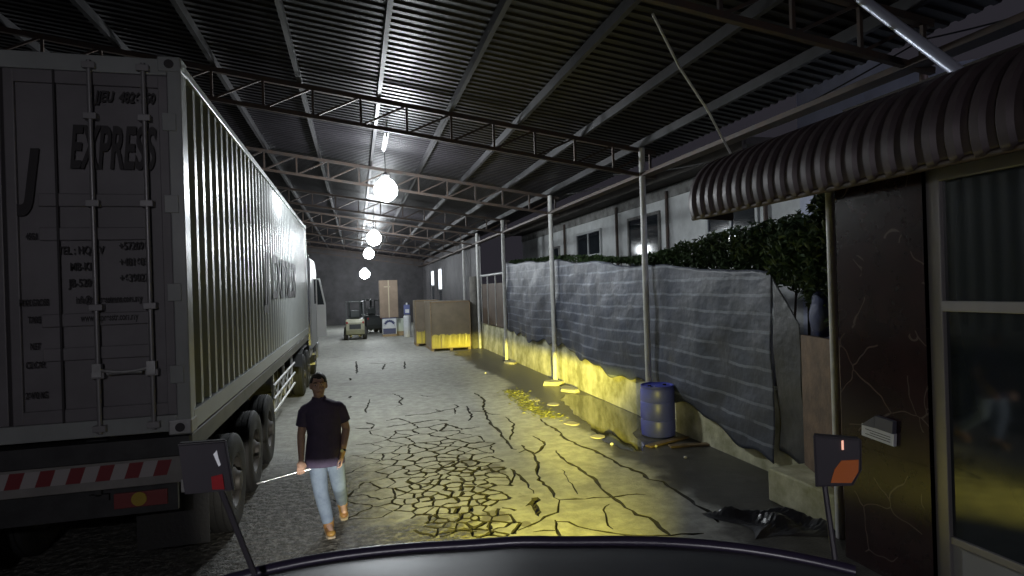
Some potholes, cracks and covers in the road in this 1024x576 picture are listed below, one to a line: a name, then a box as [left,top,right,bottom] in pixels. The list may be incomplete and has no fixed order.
crack [333,393,719,539]
